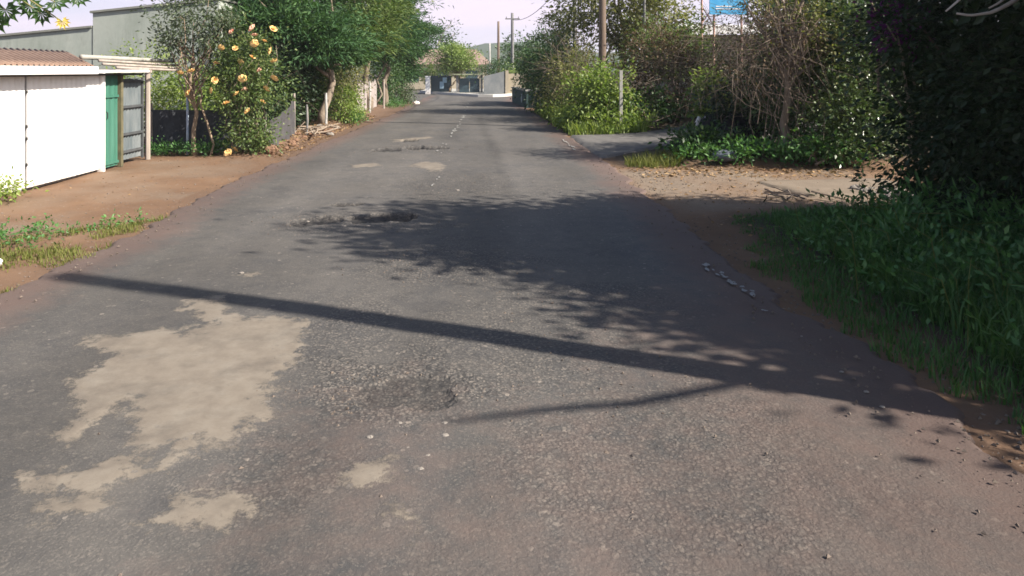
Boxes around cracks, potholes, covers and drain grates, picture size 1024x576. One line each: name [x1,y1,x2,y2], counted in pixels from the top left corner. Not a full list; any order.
pothole [344,373,461,412]
pothole [348,212,420,224]
pothole [286,215,346,228]
